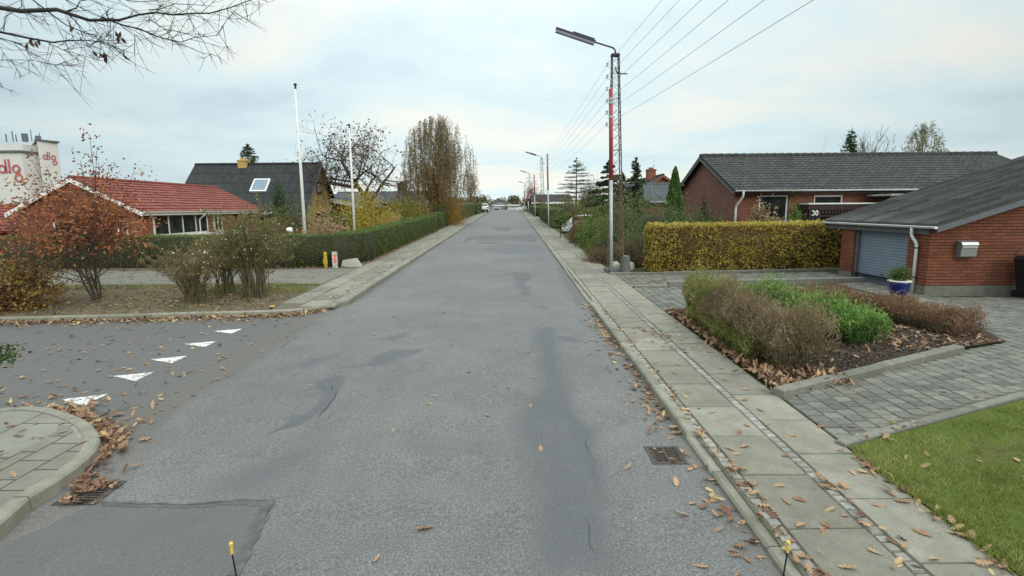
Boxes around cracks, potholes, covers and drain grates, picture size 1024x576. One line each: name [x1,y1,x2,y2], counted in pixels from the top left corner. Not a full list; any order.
drain grate [644,446,689,465]
drain grate [51,480,127,506]
